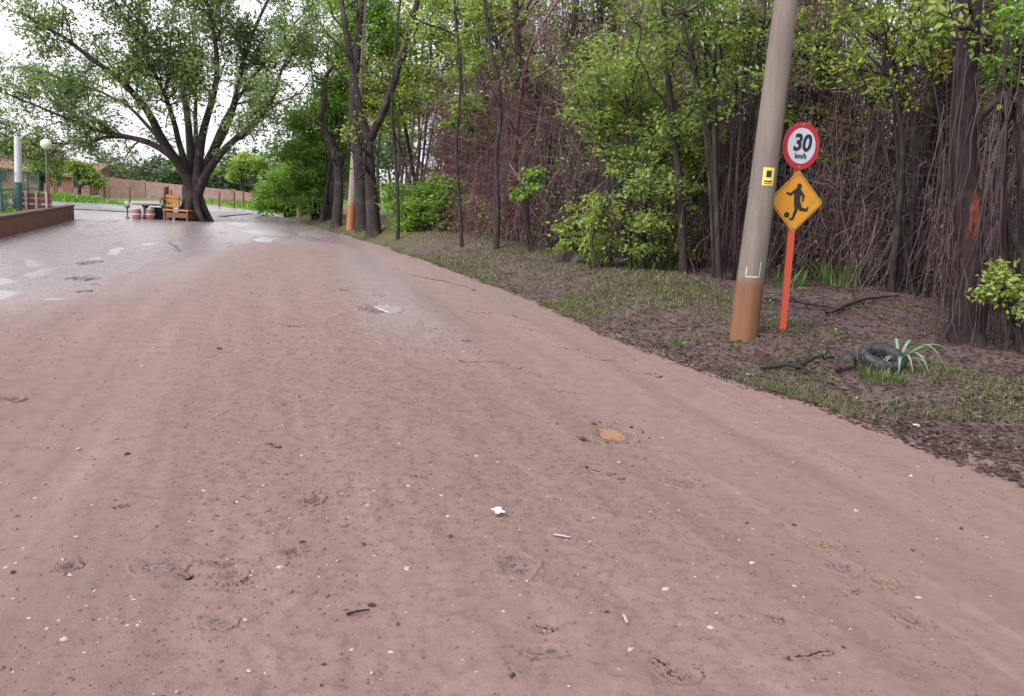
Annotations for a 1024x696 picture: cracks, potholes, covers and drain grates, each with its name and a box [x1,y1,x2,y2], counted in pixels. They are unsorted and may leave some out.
crack [426,310,577,394]
crack [406,274,476,290]
pothole [301,492,327,507]
pothole [353,302,407,316]
pothole [124,552,195,578]
pothole [651,663,703,685]
pothole [201,614,240,631]
pothole [56,559,85,572]
